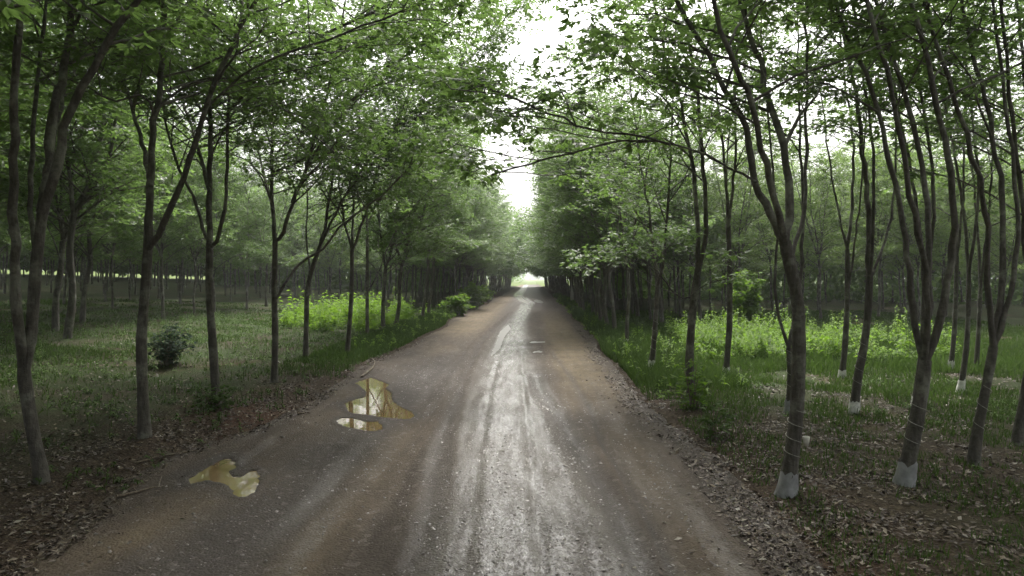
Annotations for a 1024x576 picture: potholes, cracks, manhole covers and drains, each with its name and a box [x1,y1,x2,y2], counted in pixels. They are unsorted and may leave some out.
pothole [330,416,390,433]
pothole [177,454,270,501]
pothole [338,376,421,421]
